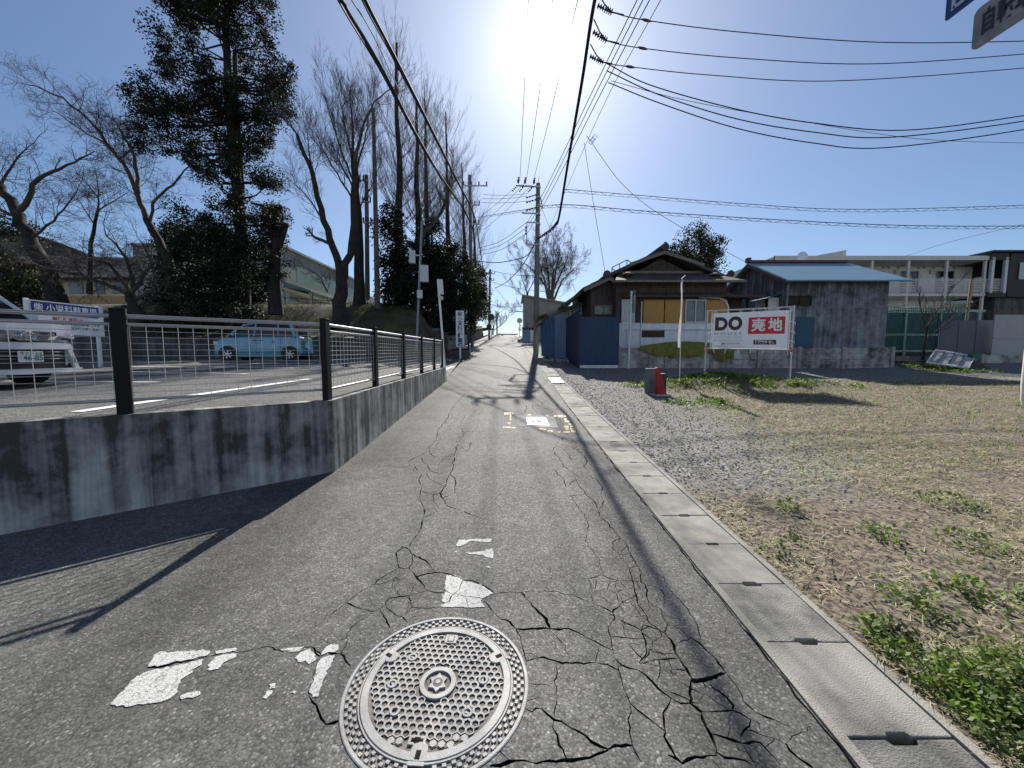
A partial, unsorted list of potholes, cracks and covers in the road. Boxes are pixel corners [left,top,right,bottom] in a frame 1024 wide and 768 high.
crack [149,382,857,768]
manhole cover [339,617,531,768]
